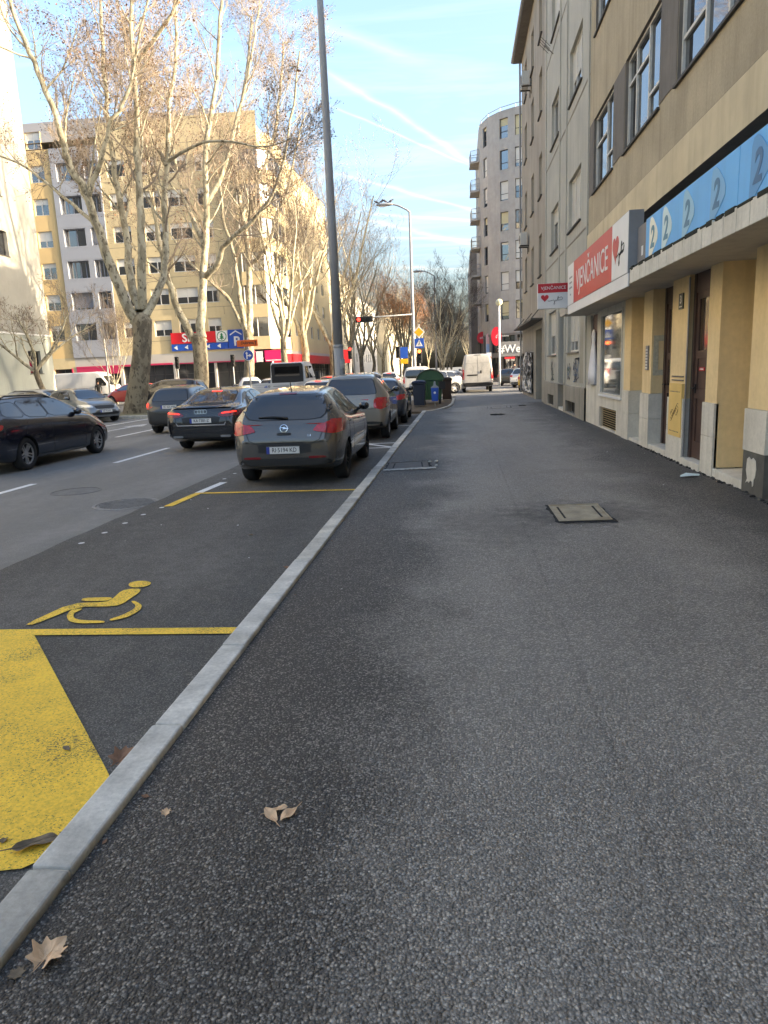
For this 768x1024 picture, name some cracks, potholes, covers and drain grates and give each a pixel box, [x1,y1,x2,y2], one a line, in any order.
manhole cover [50,487,102,496]
manhole cover [545,503,618,524]
manhole cover [92,498,159,511]
manhole cover [383,460,438,471]
